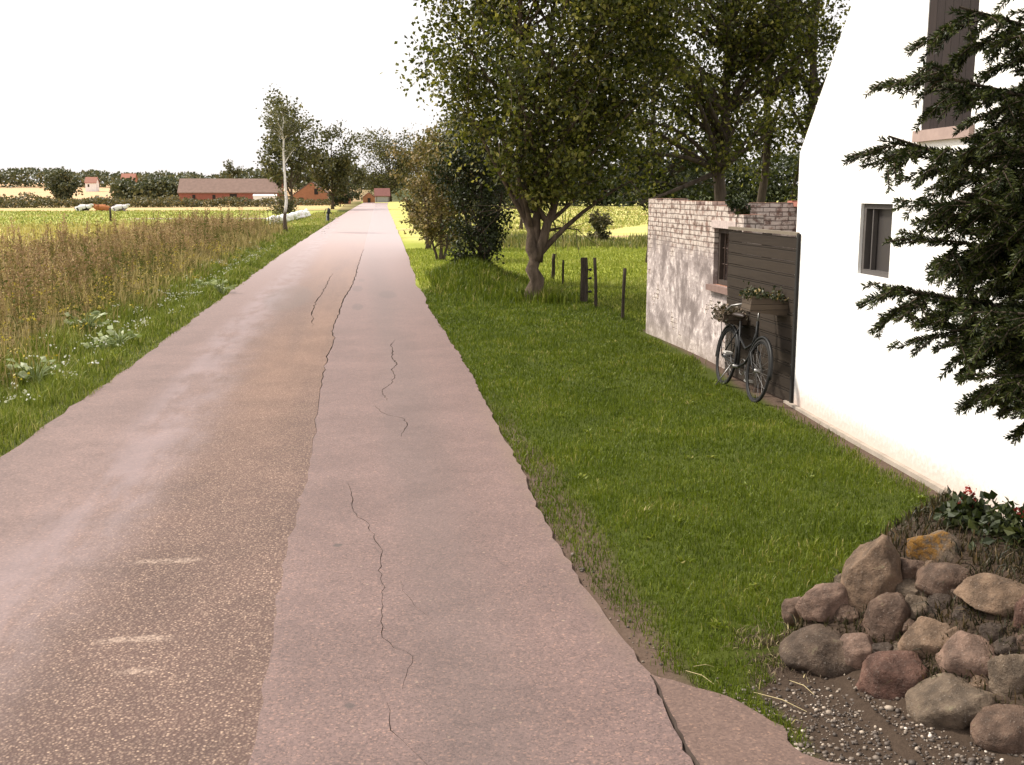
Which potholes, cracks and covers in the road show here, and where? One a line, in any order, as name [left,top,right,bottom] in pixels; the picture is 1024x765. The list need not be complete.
crack [375,340,408,436]
crack [348,484,432,689]
crack [311,250,364,445]
